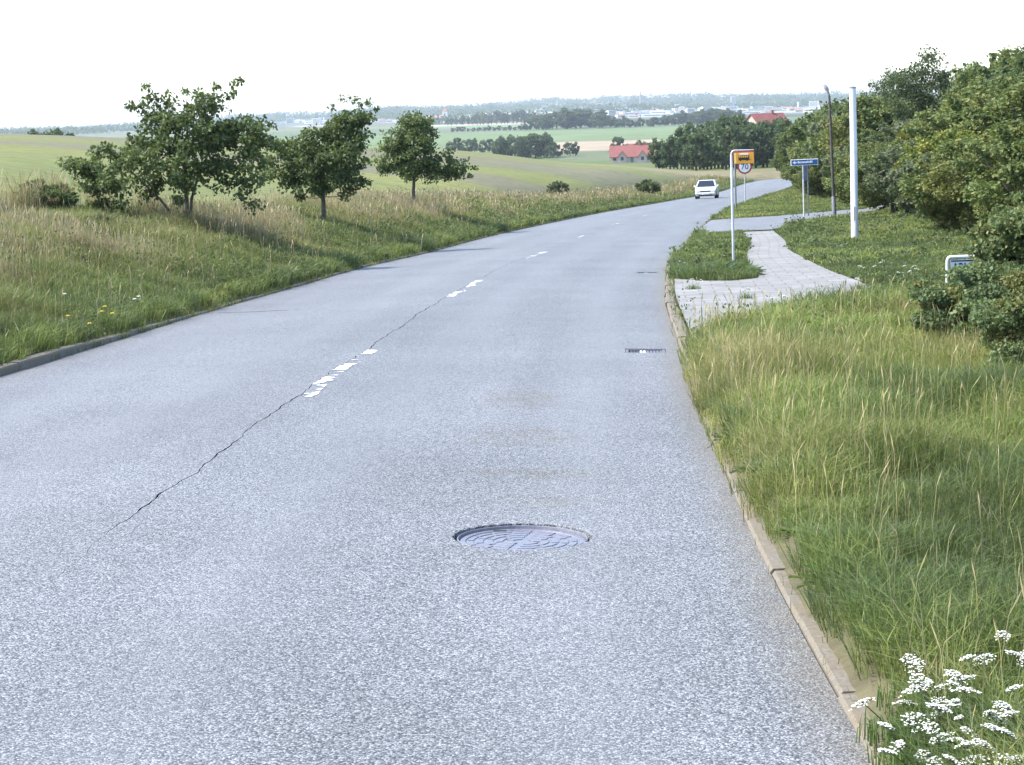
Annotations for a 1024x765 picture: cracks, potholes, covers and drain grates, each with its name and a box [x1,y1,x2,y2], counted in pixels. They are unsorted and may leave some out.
crack [20,265,506,606]
manhole cover [457,525,588,550]
